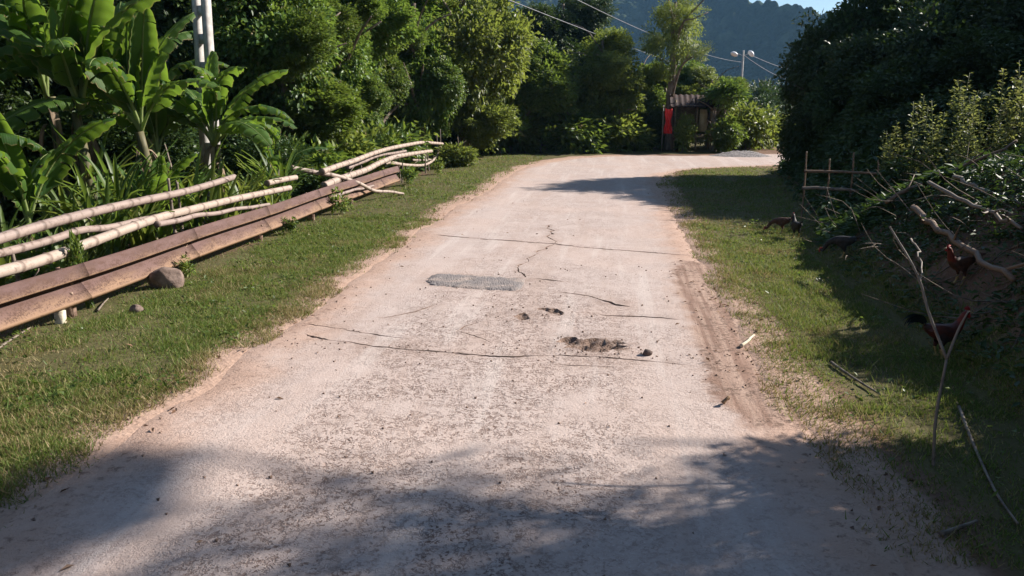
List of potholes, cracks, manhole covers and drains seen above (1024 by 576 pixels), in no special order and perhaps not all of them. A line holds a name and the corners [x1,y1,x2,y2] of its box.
pothole [556,337,630,353]
crack [304,305,684,367]
crack [442,225,689,319]
